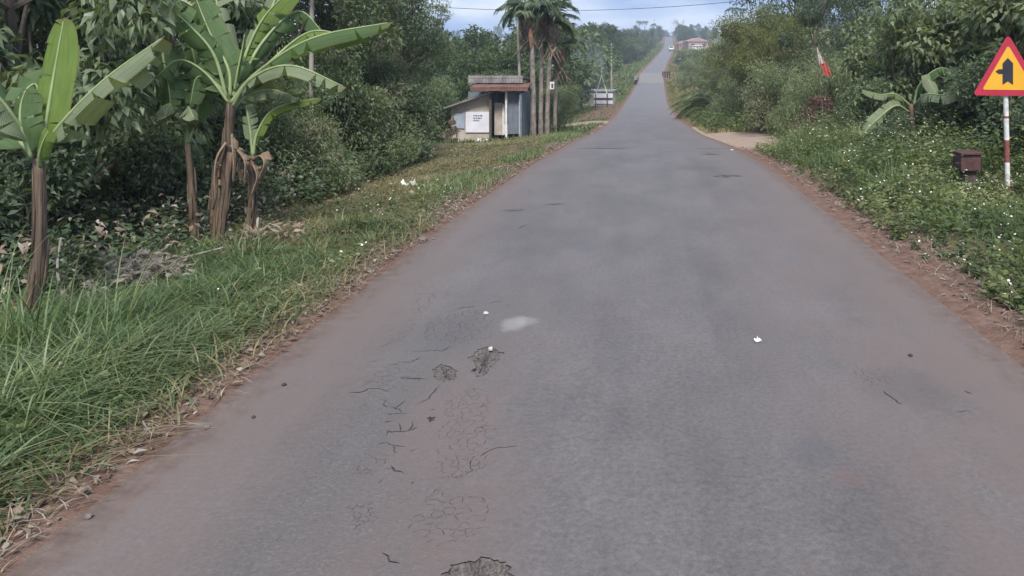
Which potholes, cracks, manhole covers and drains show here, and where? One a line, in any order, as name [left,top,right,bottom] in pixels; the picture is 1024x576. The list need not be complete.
pothole [442,557,511,576]
pothole [432,365,457,383]
pothole [470,347,504,378]
crack [395,379,490,542]
